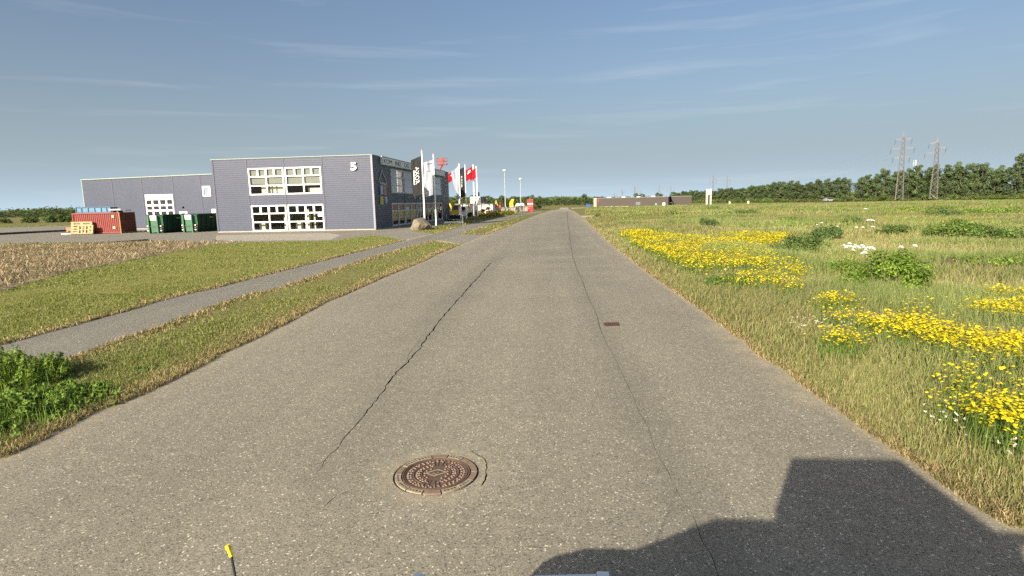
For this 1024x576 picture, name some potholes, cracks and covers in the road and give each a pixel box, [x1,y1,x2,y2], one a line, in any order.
manhole cover [393,455,479,495]
crack [316,263,491,474]
